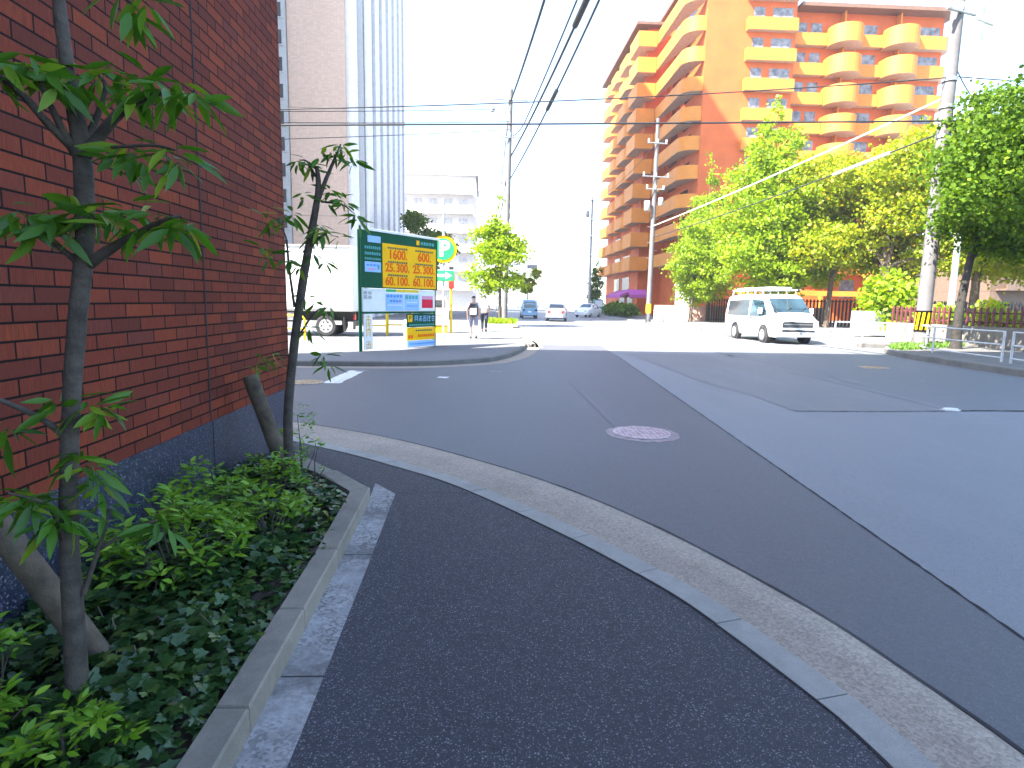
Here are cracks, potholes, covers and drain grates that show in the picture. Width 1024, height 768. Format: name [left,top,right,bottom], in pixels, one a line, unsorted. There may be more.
manhole cover [605,426,679,442]
